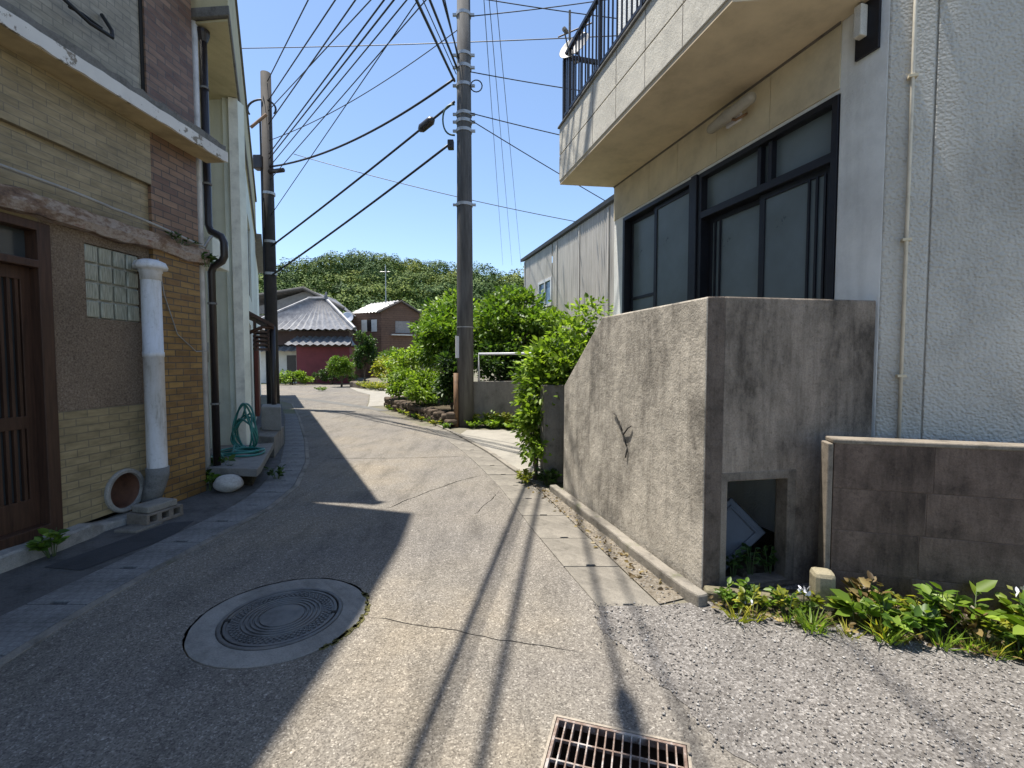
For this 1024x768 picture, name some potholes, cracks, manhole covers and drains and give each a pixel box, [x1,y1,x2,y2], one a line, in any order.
manhole cover [184,579,367,670]
crack [373,617,581,653]
drain grate [540,714,692,768]
